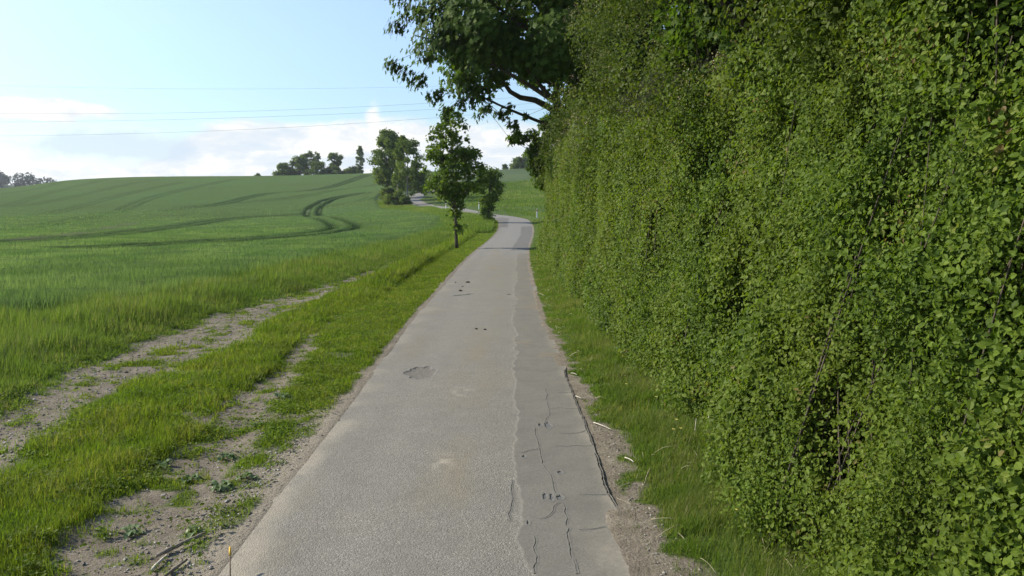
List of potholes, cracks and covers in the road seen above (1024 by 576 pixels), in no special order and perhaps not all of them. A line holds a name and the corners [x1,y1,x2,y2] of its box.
crack [507,371,620,574]
pothole [402,366,439,380]
